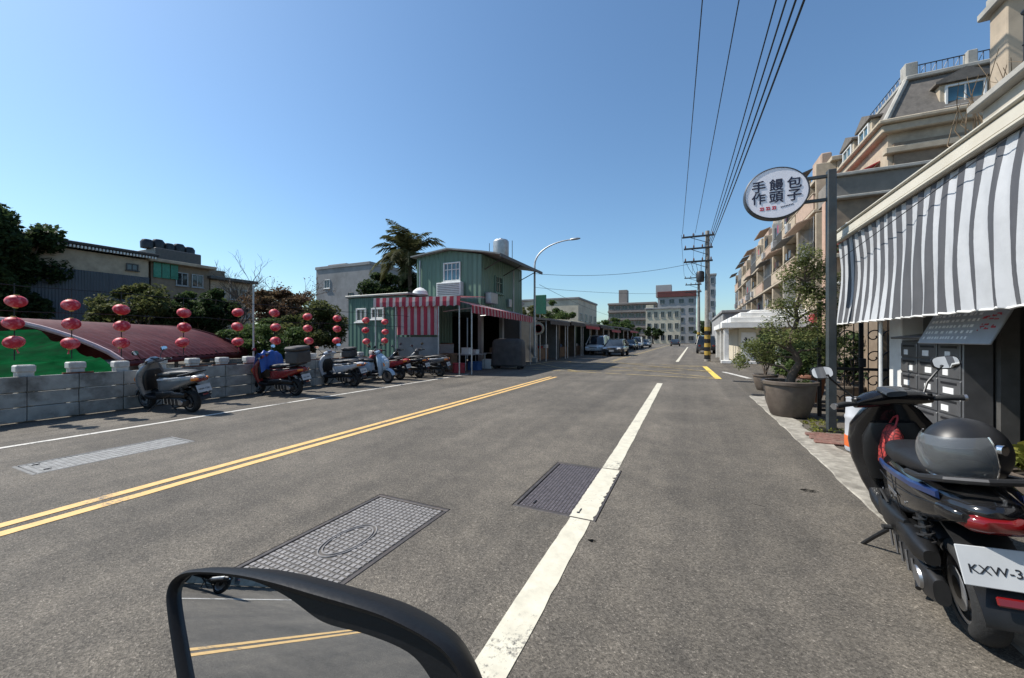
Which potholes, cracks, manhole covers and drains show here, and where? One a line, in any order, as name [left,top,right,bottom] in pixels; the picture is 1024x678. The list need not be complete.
manhole cover [513,462,622,522]
manhole cover [237,494,449,585]
manhole cover [12,437,194,475]
